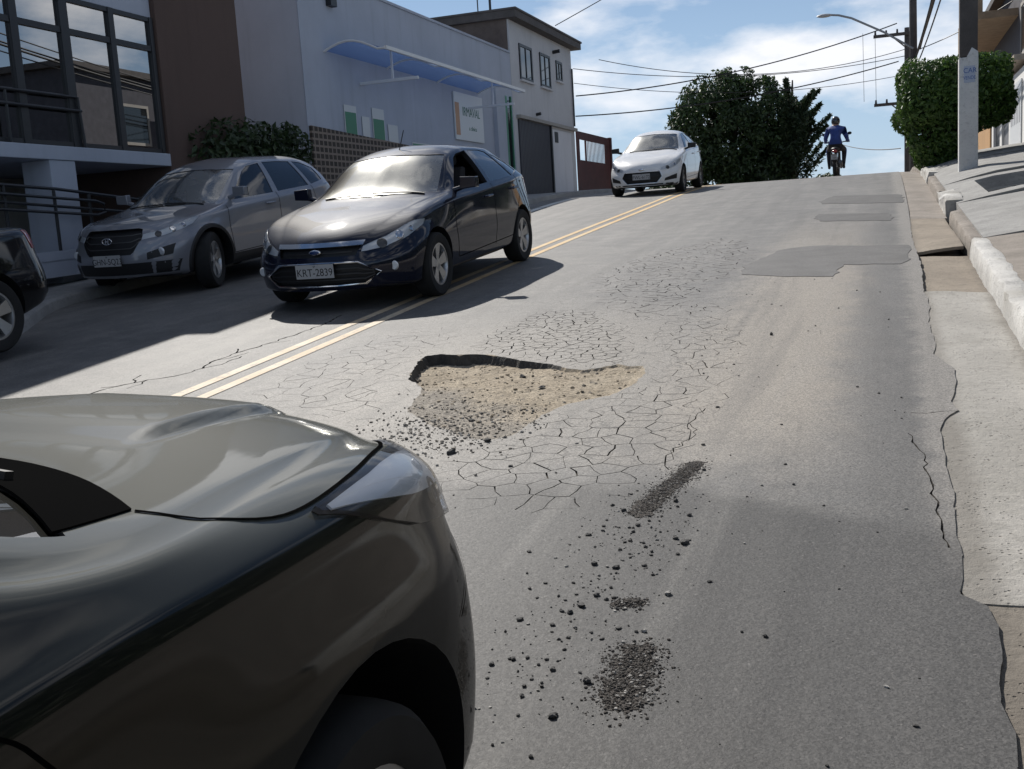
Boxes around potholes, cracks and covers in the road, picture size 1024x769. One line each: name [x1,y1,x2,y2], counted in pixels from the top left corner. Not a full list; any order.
crack [436,238,758,513]
crack [908,433,951,548]
crack [90,315,341,394]
crack [252,331,462,420]
pothole [407,354,645,440]
